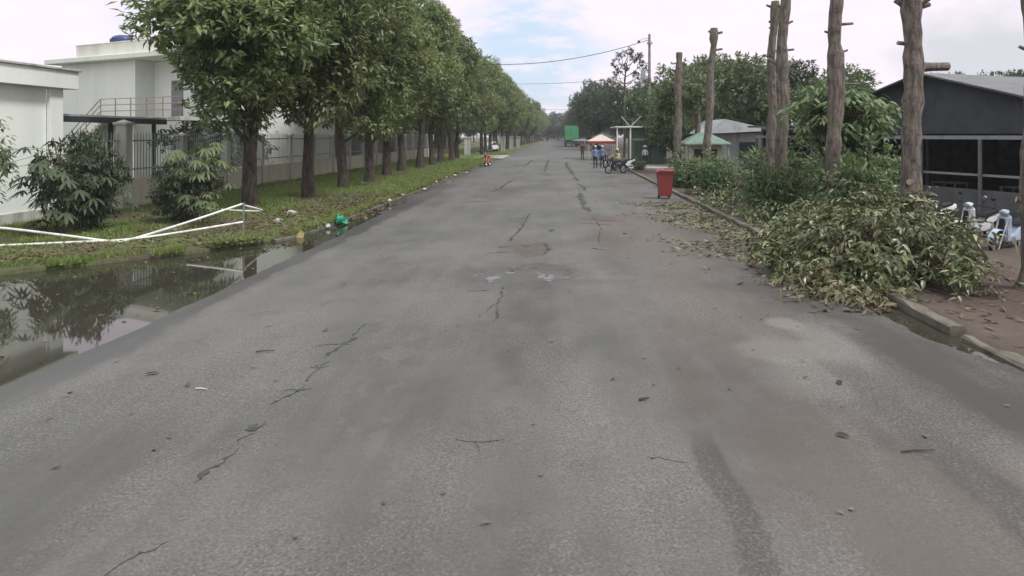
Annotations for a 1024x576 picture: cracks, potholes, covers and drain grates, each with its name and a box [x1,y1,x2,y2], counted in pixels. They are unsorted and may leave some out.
crack [497,160,625,251]
